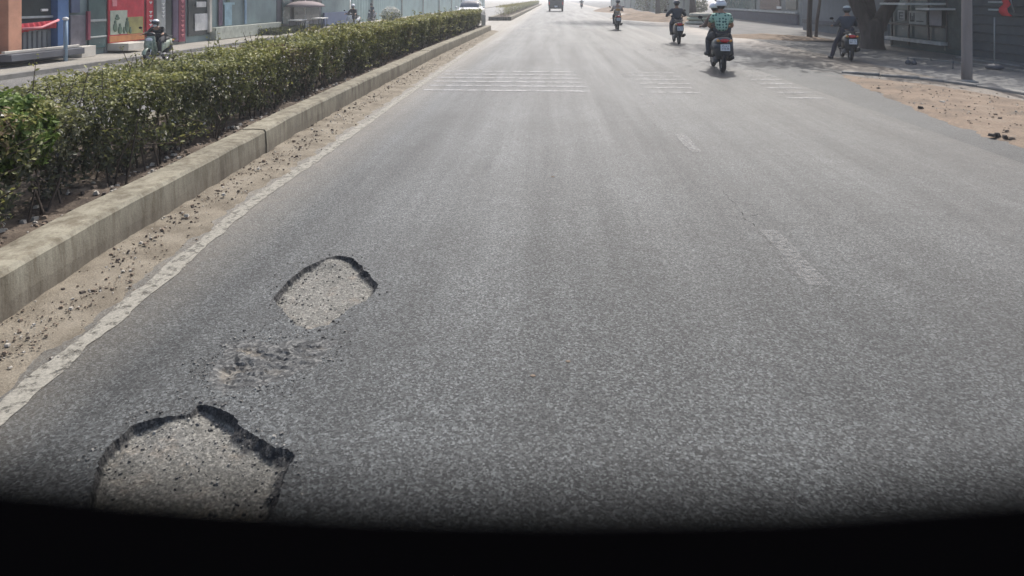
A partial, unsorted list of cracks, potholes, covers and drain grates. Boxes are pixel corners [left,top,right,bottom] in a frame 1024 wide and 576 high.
pothole [254,252,391,332]
pothole [77,391,321,484]
crack [723,191,791,273]
